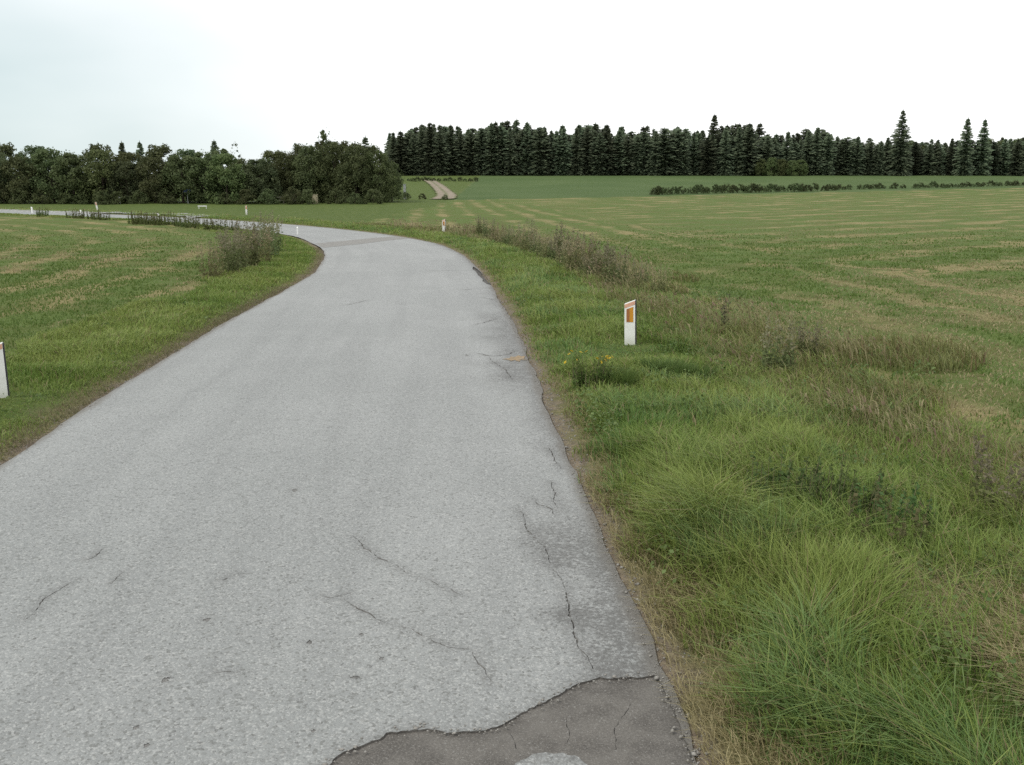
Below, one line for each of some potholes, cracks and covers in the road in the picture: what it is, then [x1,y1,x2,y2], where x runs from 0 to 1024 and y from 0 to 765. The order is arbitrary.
crack [521,448,594,670]
crack [405,627,491,680]
